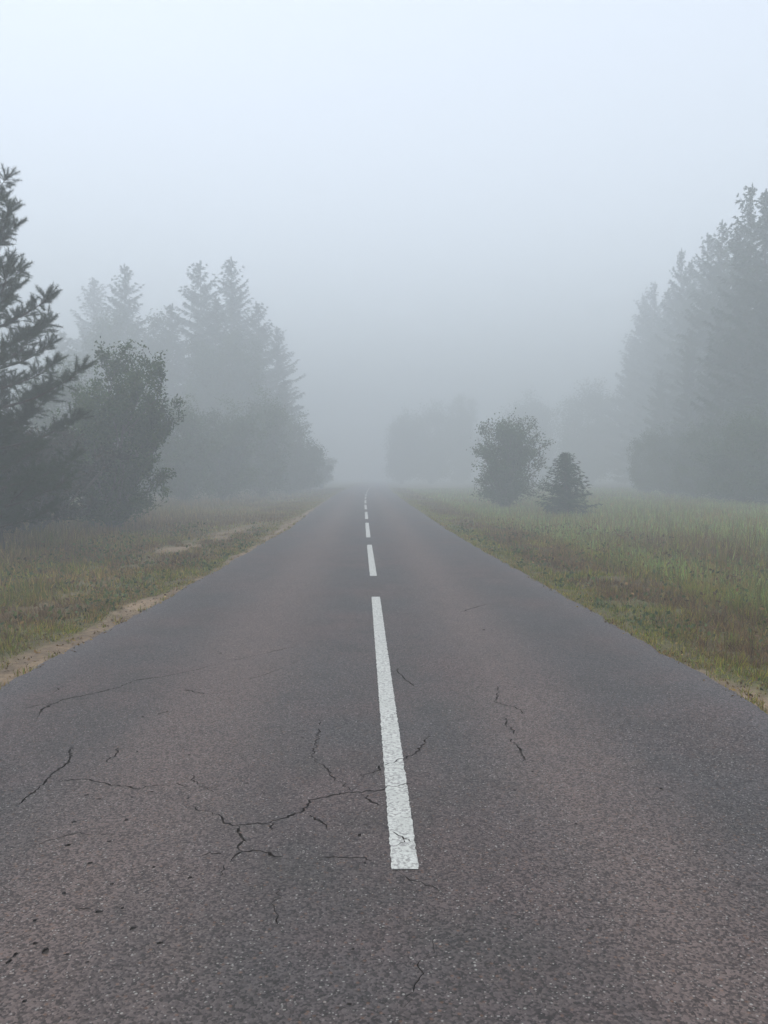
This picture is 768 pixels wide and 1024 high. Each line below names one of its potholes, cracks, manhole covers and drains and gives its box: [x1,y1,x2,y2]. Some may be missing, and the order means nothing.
crack [270,890,284,932]
crack [403,938,435,1008]
crack [494,686,527,763]
crack [25,648,296,720]
crack [185,720,430,877]
crack [18,745,214,807]
